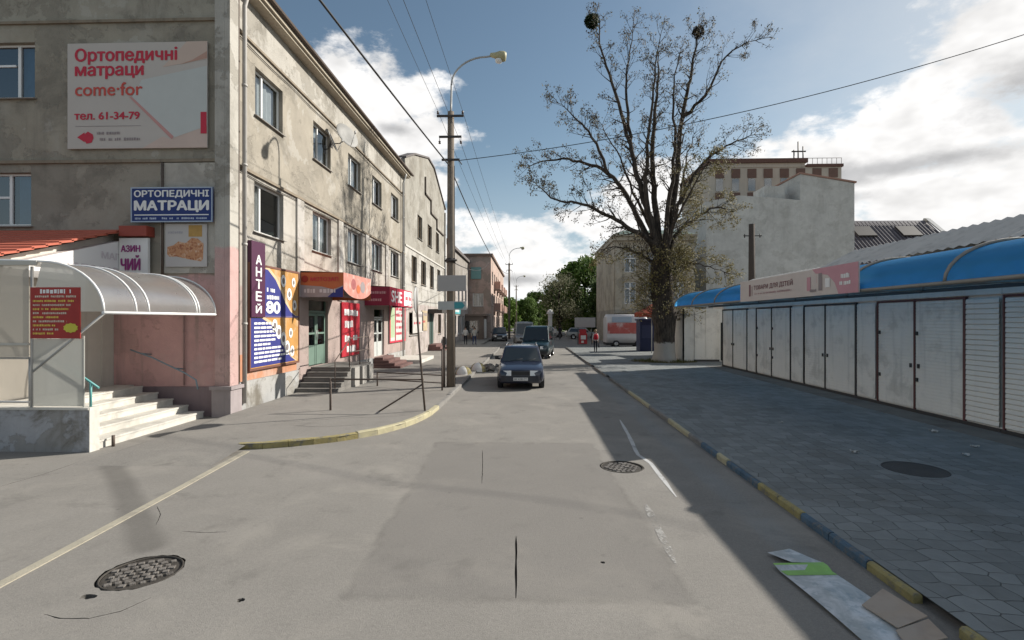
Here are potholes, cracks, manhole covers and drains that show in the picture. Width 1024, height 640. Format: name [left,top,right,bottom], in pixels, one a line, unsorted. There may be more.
manhole cover [880,461,952,478]
manhole cover [600,461,644,473]
manhole cover [94,555,185,591]
crack [45,600,145,619]
